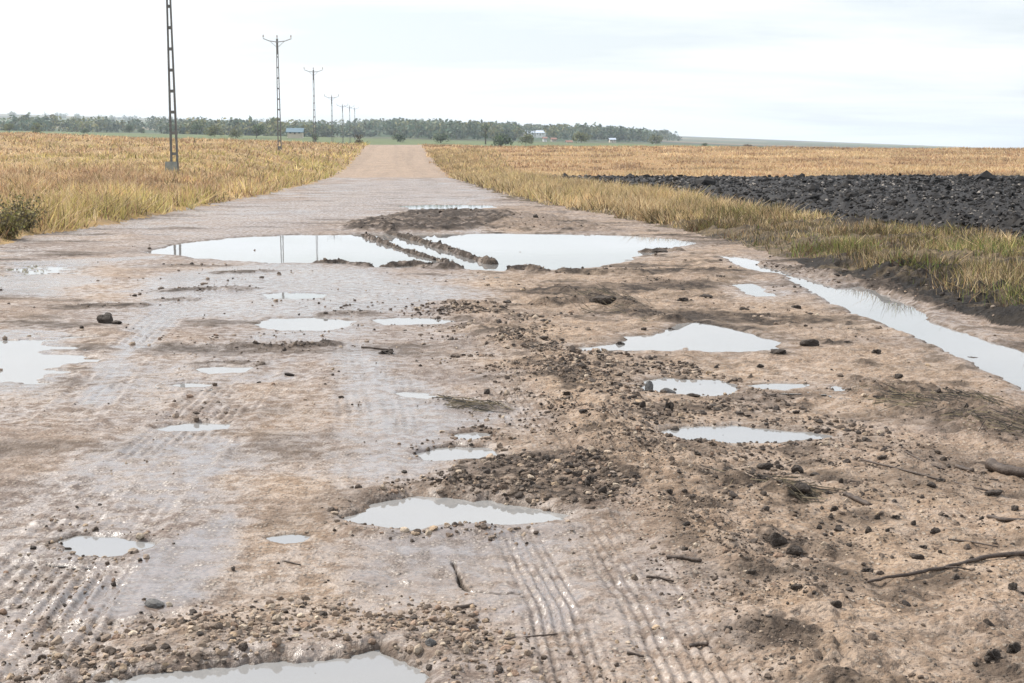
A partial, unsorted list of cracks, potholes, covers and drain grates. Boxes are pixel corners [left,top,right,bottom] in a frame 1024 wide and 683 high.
pothole [101,221,744,278]
